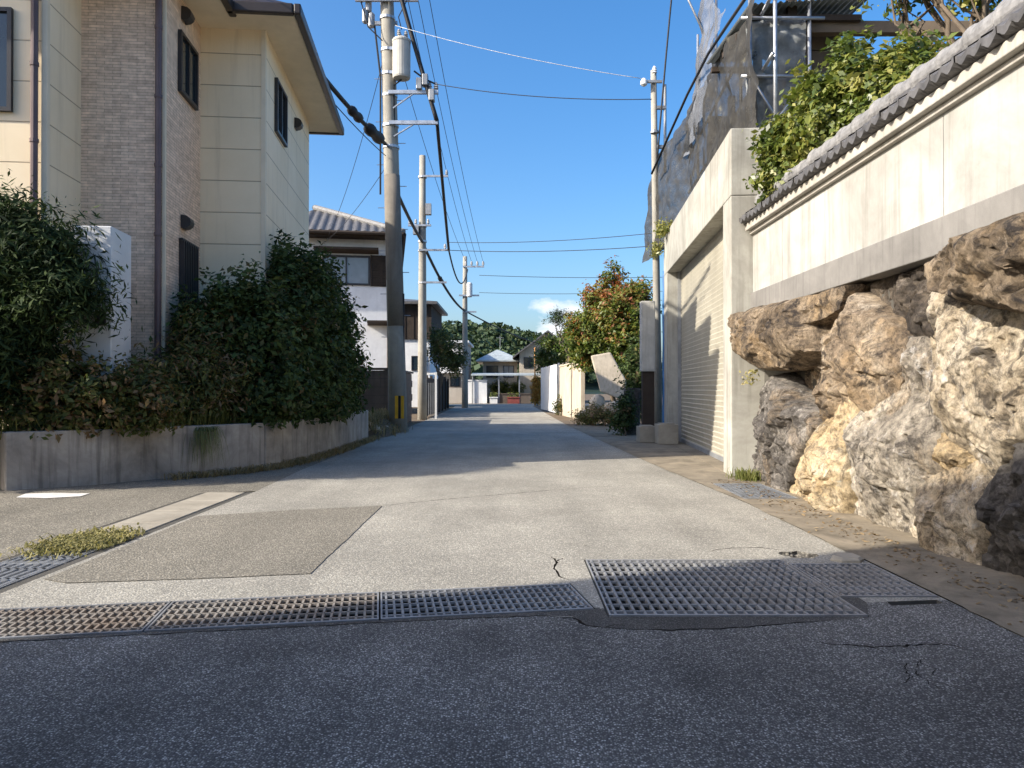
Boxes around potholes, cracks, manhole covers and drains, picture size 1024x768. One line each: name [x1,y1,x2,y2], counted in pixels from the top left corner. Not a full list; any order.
drain grate [380,583,593,620]
drain grate [789,563,937,597]
drain grate [0,563,65,589]
crack [808,641,978,690]
drain grate [144,592,379,632]
crack [550,556,569,580]
drain grate [586,559,868,616]
drain grate [713,483,799,499]
drain grate [0,601,171,639]
